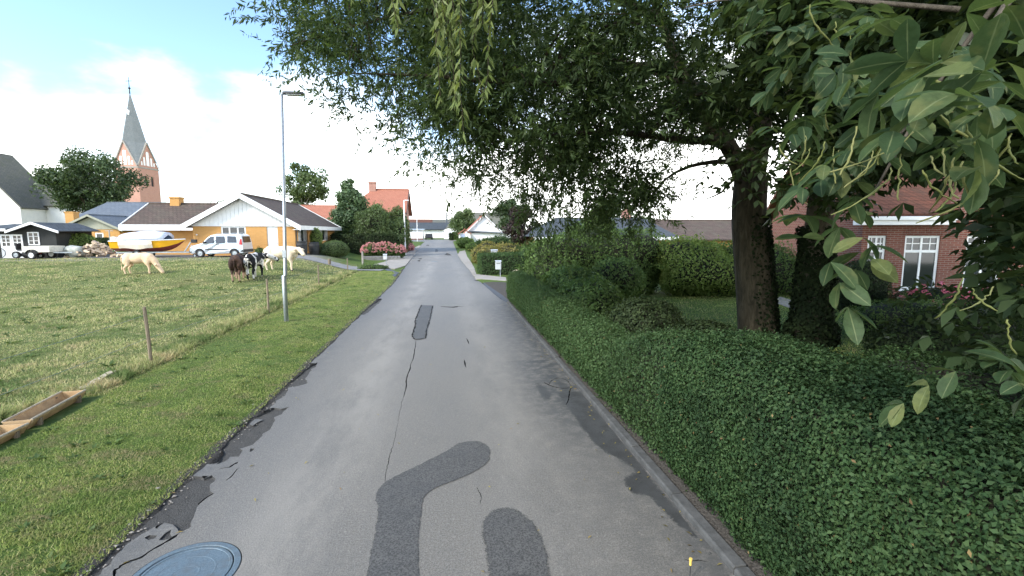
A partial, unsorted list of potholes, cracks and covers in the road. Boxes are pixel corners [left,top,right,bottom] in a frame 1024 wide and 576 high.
manhole cover [133,542,242,576]
